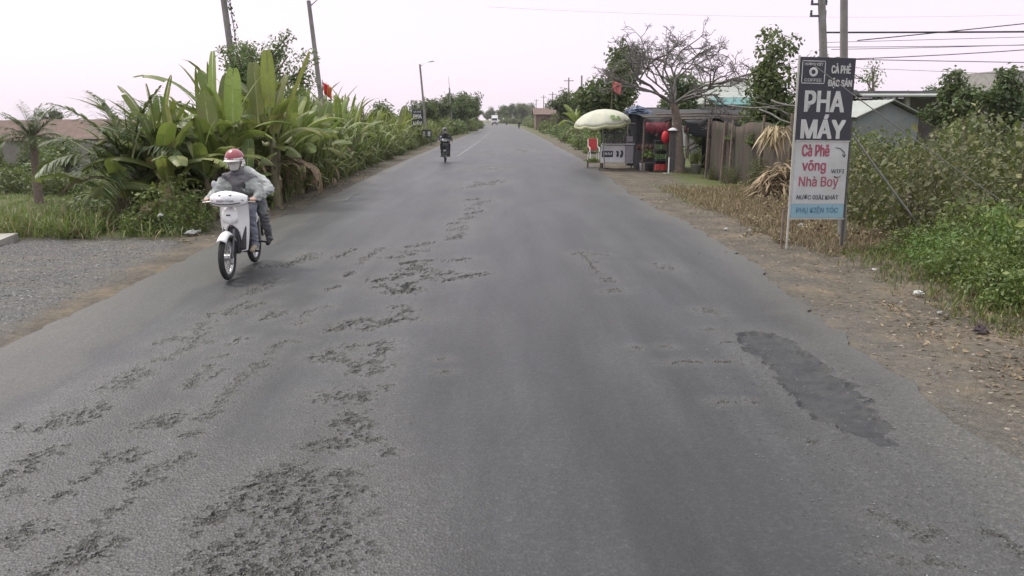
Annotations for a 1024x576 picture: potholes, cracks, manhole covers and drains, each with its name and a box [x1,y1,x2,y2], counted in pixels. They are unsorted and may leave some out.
crack [570,250,624,293]
crack [0,149,532,576]
